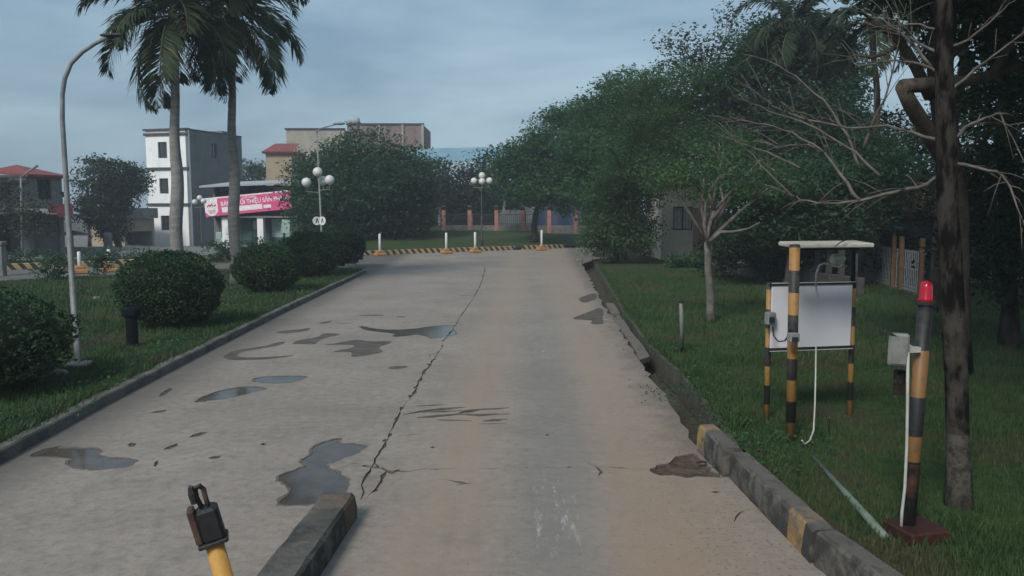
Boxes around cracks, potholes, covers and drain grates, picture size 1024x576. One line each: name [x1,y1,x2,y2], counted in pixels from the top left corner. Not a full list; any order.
crack [347,267,653,499]
